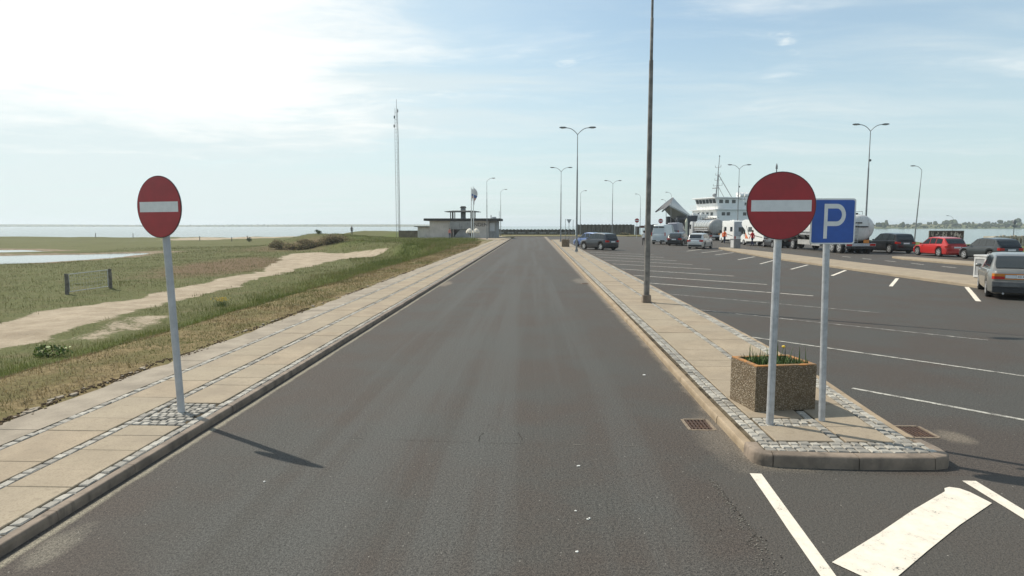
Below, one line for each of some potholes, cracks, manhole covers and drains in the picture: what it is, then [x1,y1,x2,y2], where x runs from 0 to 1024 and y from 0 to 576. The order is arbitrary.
drain grate [681,419,717,431]
drain grate [894,425,942,438]
